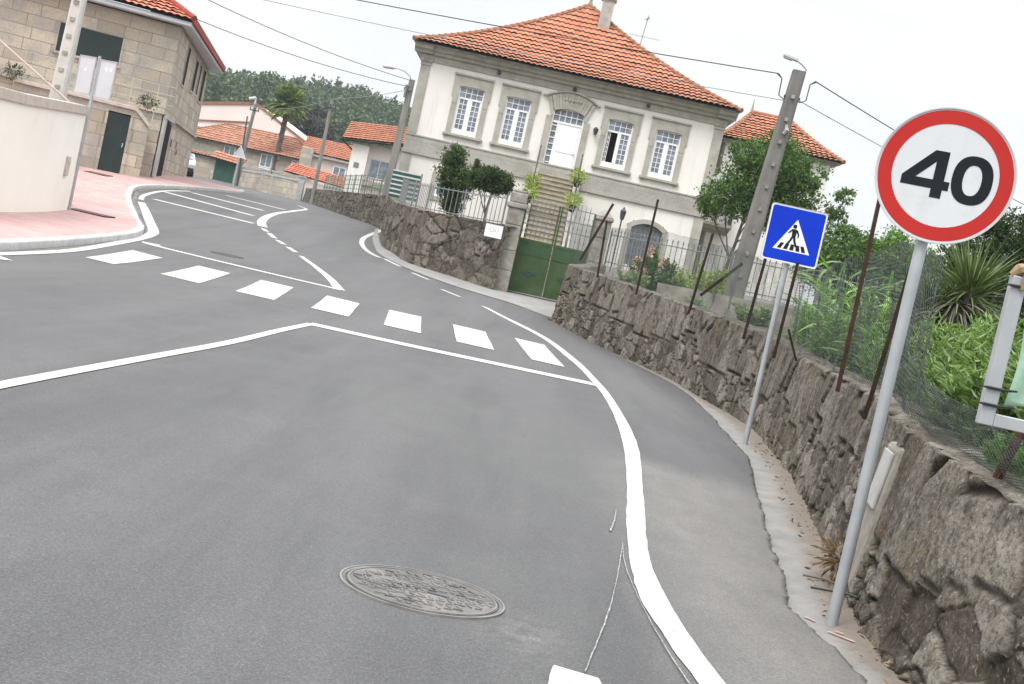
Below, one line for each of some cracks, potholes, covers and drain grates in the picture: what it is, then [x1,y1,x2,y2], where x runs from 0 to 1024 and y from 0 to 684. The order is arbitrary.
manhole cover [339,564,505,620]
